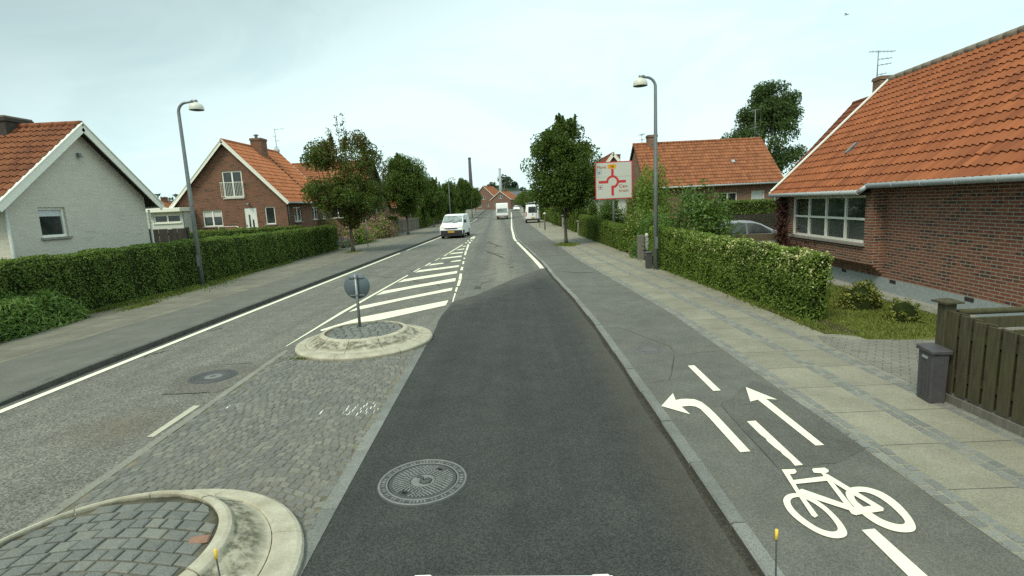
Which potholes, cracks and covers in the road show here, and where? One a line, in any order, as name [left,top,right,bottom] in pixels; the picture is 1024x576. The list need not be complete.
crack [480,241,510,285]
manhole cover [634,346,662,354]
manhole cover [187,369,238,384]
manhole cover [377,459,468,507]
